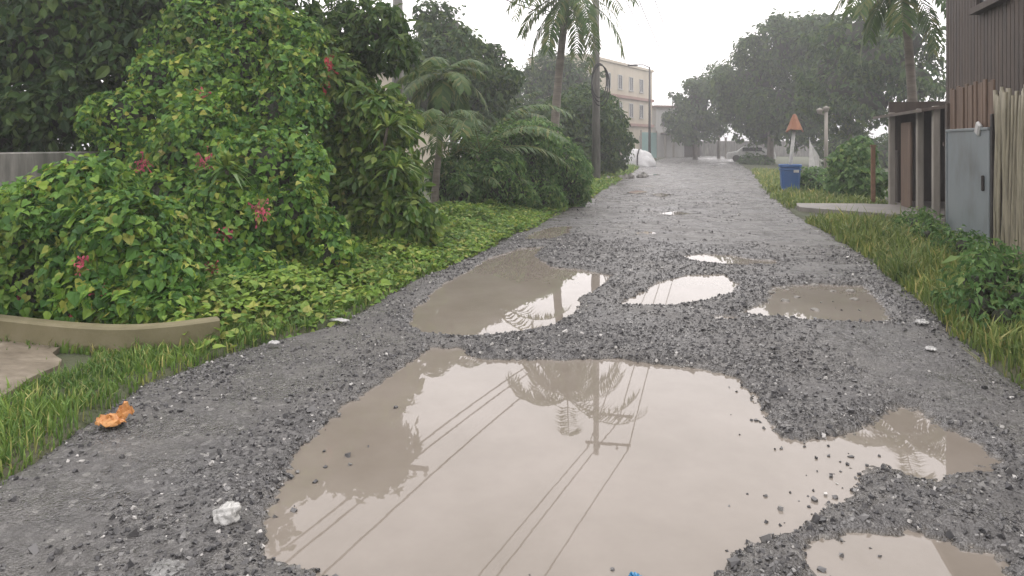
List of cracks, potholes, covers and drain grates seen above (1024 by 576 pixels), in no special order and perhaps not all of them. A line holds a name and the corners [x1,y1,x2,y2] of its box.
pothole [638,208,716,217]
pothole [760,498,1024,576]
pothole [604,269,752,307]
pothole [209,335,897,576]
pothole [666,249,796,266]
pothole [727,277,916,324]
pothole [798,387,1024,495]
pothole [390,243,627,338]
